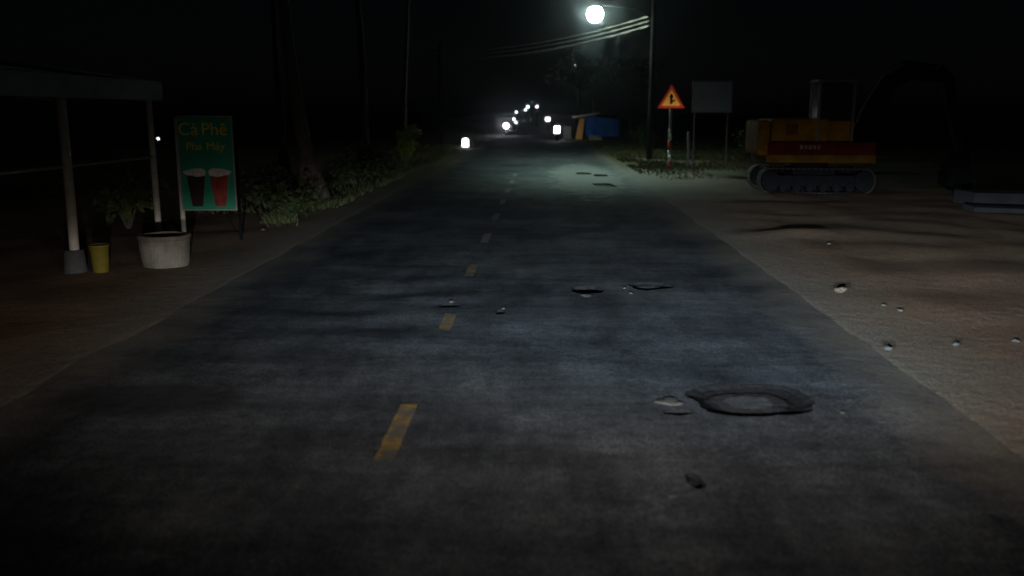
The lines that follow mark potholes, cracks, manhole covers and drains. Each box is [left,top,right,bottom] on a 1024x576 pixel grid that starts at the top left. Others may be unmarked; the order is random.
pothole [685,473,706,489]
pothole [684,384,816,417]
pothole [571,285,604,294]
pothole [628,282,674,290]
